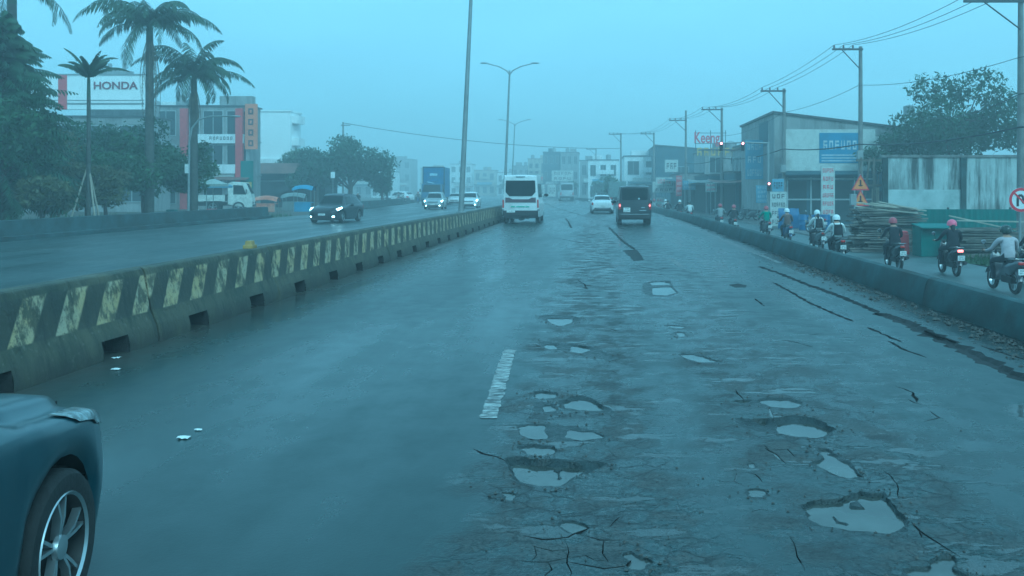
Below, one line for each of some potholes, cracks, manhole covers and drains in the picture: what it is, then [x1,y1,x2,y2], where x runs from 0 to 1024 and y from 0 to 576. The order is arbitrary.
pothole [900,555,969,576]
pothole [558,395,616,416]
pothole [539,315,583,327]
pothole [744,488,769,500]
pothole [808,448,864,479]
pothole [735,415,837,439]
pothole [504,456,607,488]
pothole [678,353,722,364]
pothole [555,519,593,536]
pothole [533,390,559,400]
pothole [516,423,609,442]
pothole [641,280,679,297]
